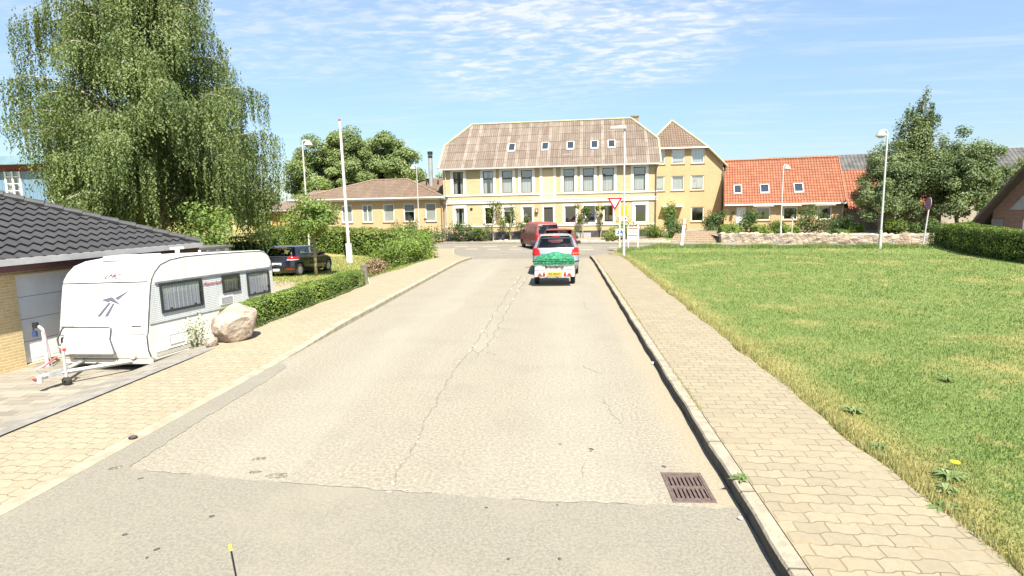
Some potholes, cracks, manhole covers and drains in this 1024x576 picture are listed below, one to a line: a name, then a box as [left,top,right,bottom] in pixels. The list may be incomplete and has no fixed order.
drain grate [661,472,717,503]
crack [394,276,529,487]
